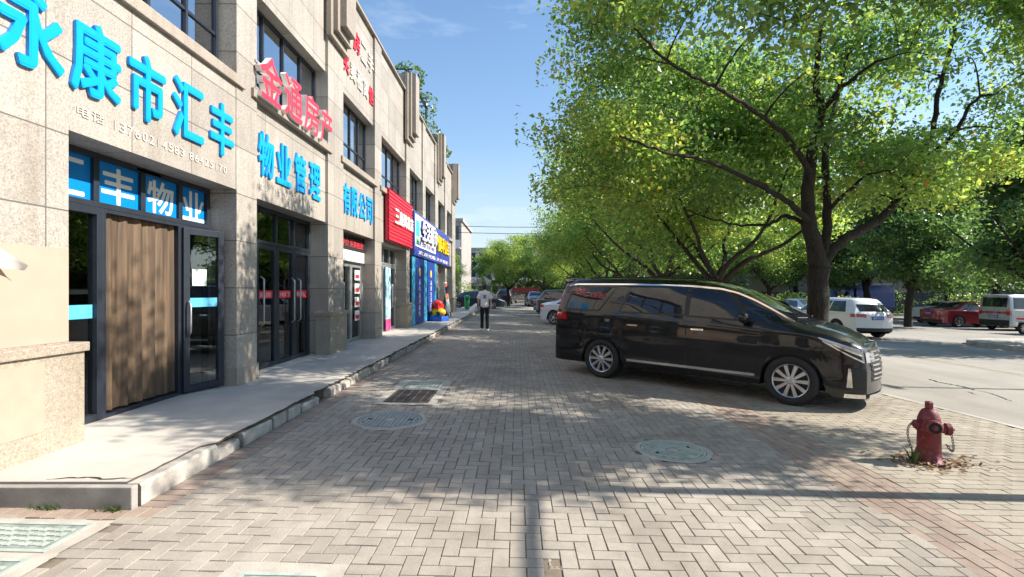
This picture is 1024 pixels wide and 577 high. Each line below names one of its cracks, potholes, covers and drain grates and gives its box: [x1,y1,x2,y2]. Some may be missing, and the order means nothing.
drain grate [383,389,438,403]
manhole cover [635,439,713,463]
manhole cover [351,411,426,430]
